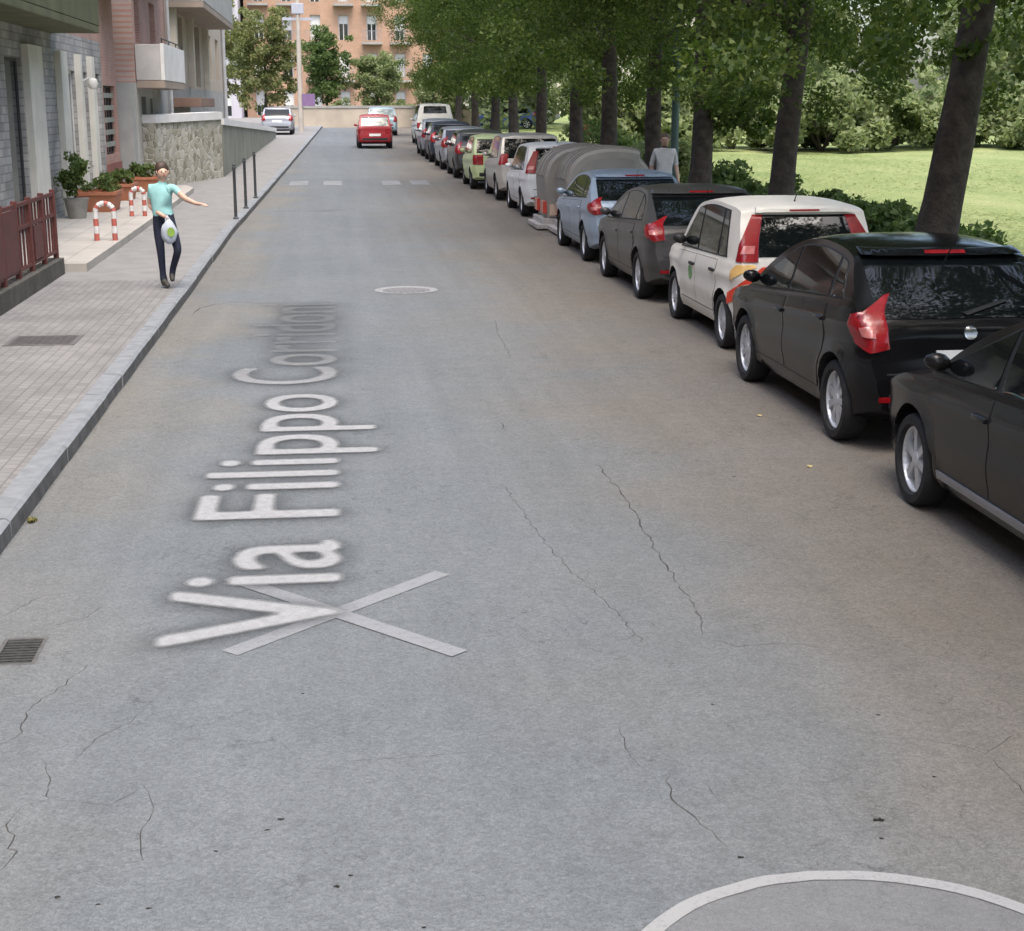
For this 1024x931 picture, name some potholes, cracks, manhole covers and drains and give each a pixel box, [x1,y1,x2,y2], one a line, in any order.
manhole cover [375,286,438,294]
crack [619,726,730,848]
crack [2,762,154,873]
crack [597,464,818,648]
crack [1,665,87,745]
drain grate [0,636,49,666]
crack [501,484,646,645]
crack [919,732,1024,793]
